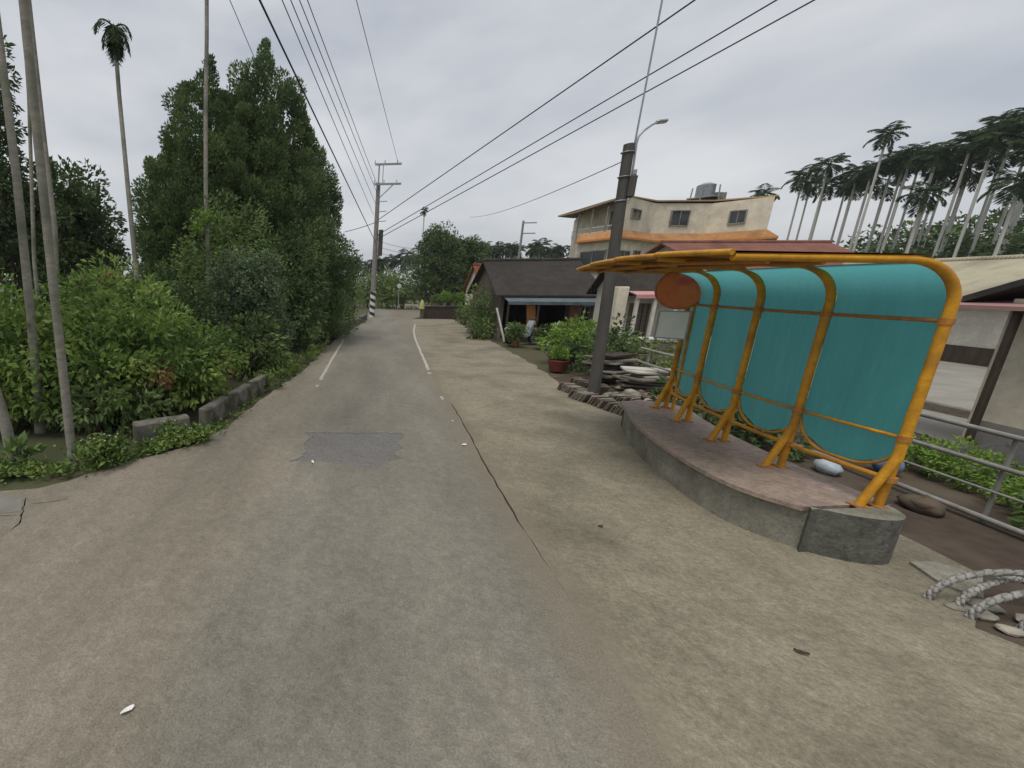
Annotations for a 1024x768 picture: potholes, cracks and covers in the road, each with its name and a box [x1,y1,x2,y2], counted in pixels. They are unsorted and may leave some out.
crack [8,498,65,531]
crack [452,405,573,604]
